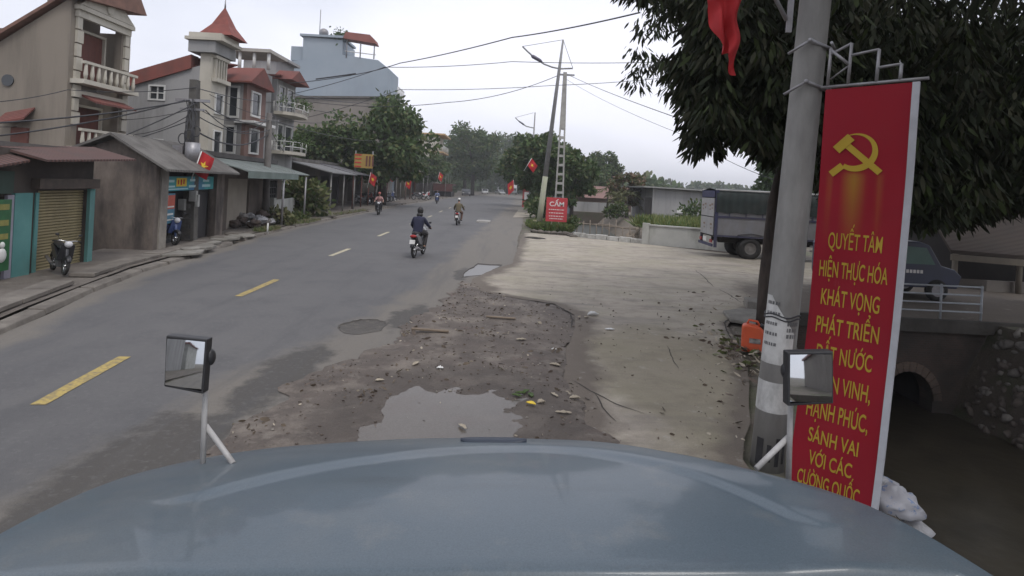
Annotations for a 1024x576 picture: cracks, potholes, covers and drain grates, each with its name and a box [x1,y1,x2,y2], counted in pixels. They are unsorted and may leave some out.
pothole [462,263,502,277]
crack [578,383,634,421]
